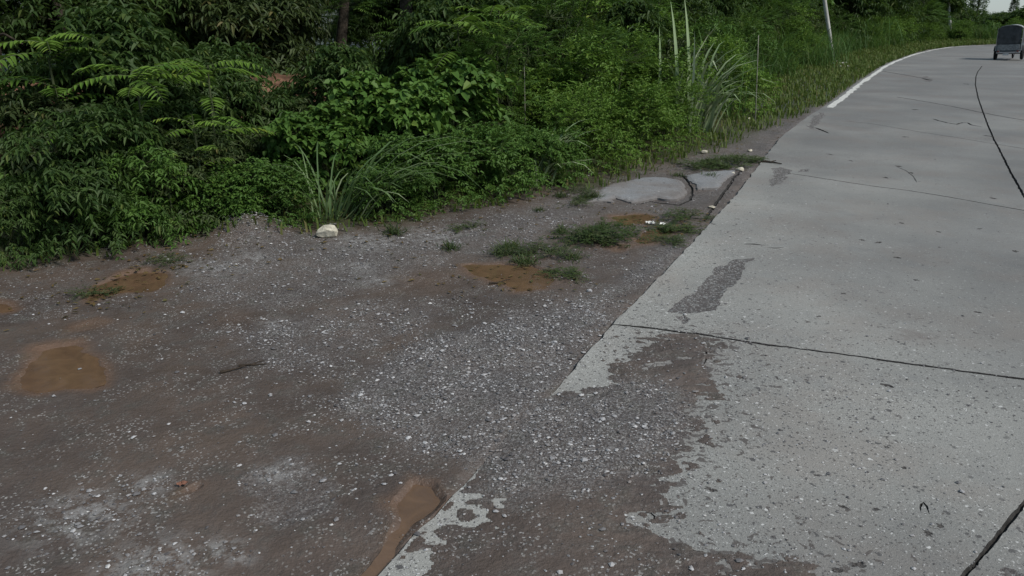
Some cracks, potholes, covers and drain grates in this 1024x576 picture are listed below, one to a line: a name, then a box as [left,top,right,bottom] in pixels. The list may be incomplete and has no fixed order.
pothole [13,340,107,394]
pothole [460,263,556,292]
pothole [360,476,447,576]
pothole [86,268,171,302]
